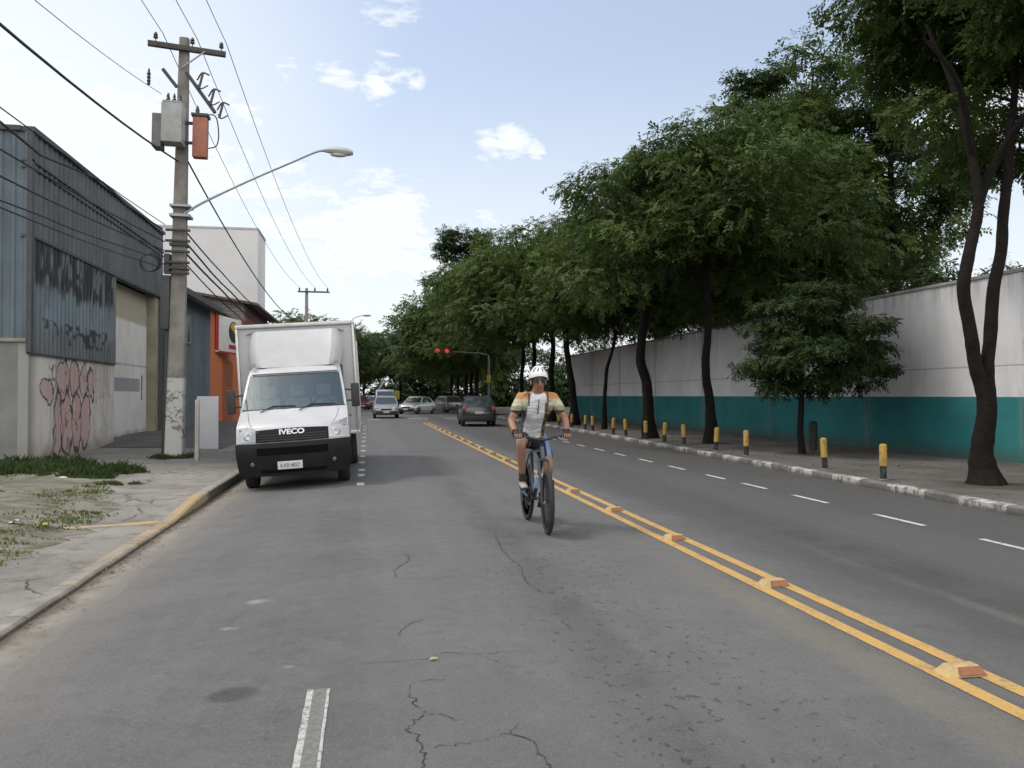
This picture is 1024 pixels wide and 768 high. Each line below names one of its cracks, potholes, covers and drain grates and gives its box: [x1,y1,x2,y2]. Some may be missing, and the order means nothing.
crack [404,678,551,768]
